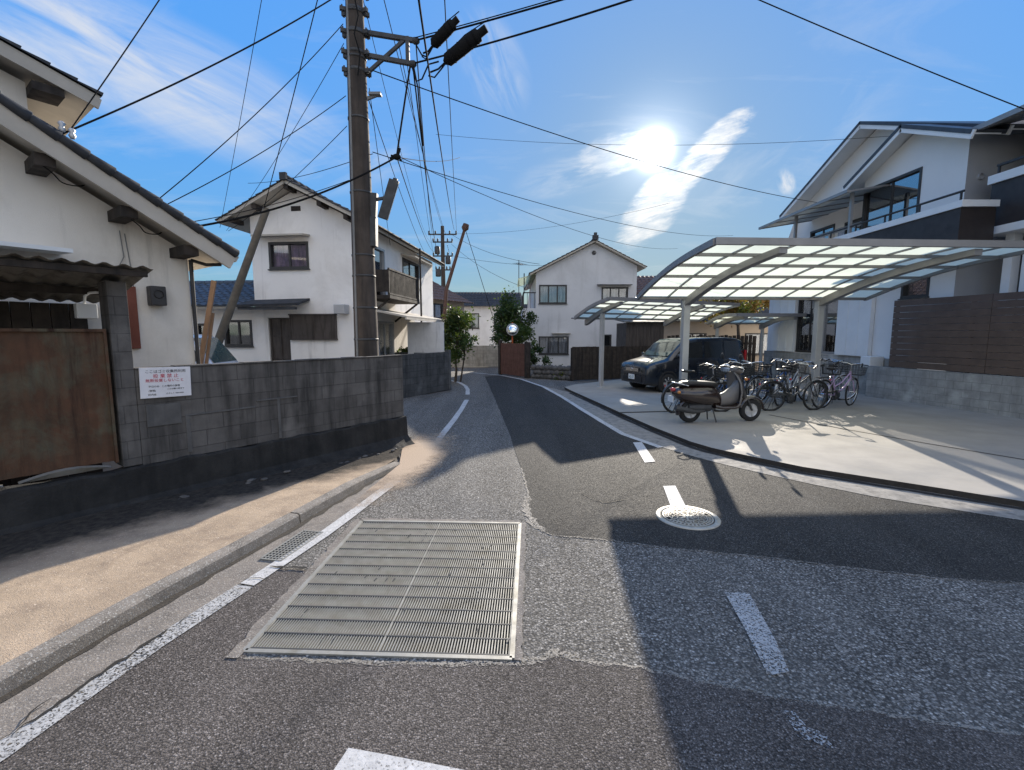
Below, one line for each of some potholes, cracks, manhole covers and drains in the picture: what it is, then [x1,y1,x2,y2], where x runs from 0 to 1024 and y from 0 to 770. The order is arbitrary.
drain grate [260,530,323,561]
manhole cover [655,505,721,530]
